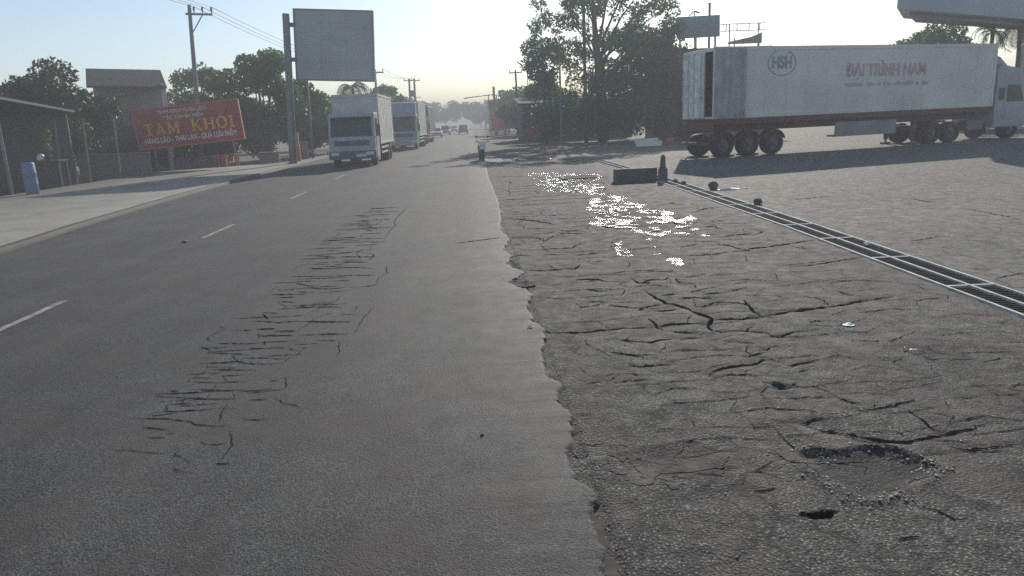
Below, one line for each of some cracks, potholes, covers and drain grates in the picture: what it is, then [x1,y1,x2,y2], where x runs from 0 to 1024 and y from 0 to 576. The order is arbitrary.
crack [132,207,405,473]
drain grate [782,223,854,240]
crack [897,502,963,540]
crack [506,177,1024,483]
pothole [799,510,834,520]
drain grate [945,284,1024,319]
drain grate [818,237,911,259]
drain grate [751,212,813,226]
pothole [762,380,800,390]
drain grate [725,203,778,215]
pothole [806,444,935,499]
drain grate [704,196,749,205]
